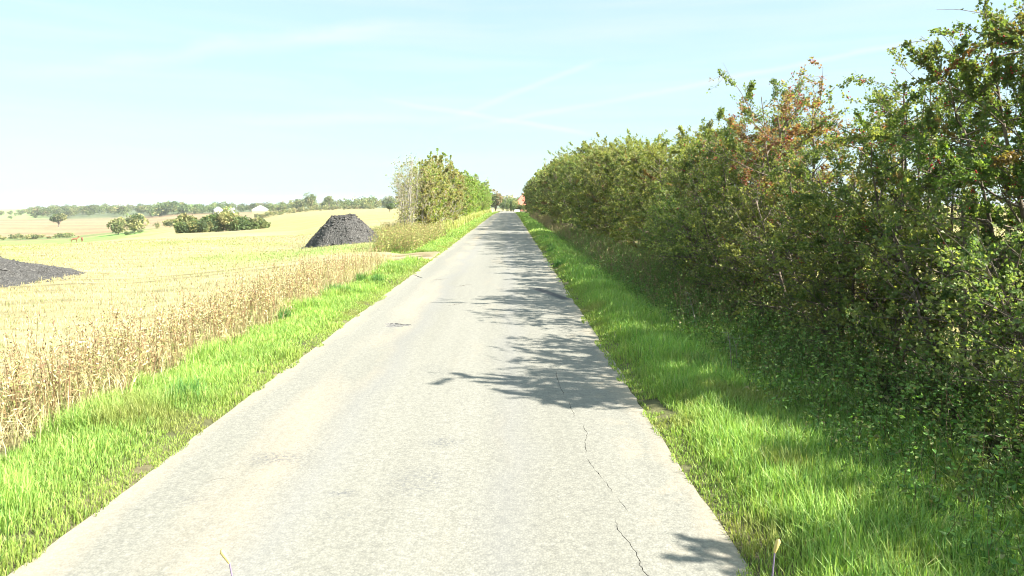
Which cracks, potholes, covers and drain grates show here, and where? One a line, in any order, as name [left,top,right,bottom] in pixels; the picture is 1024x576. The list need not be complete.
crack [556,373,649,576]
